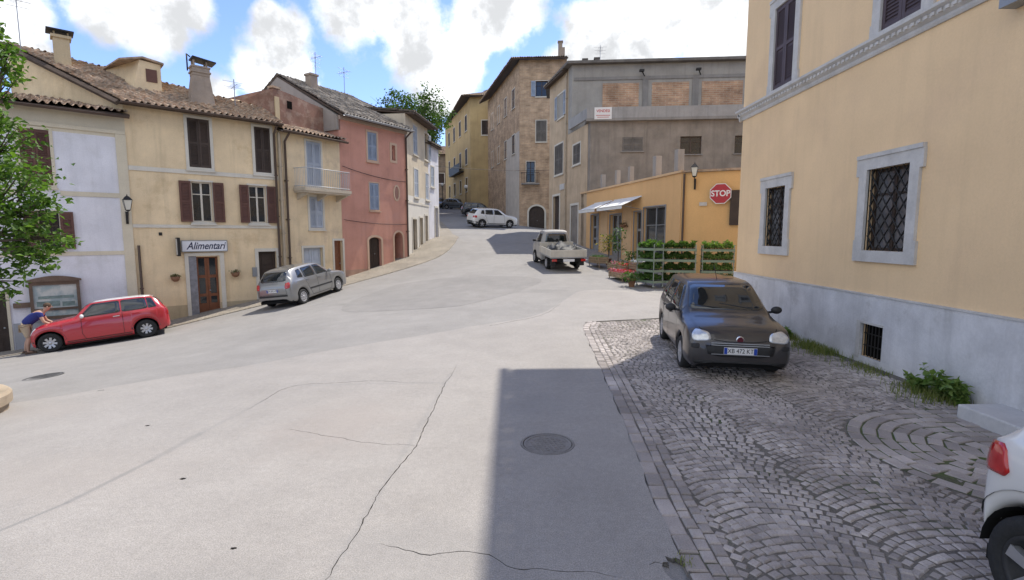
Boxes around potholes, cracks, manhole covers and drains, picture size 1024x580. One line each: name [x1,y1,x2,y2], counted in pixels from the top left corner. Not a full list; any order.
manhole cover [521,433,574,455]
crack [383,544,622,578]
crack [292,367,456,577]
manhole cover [22,372,64,381]
